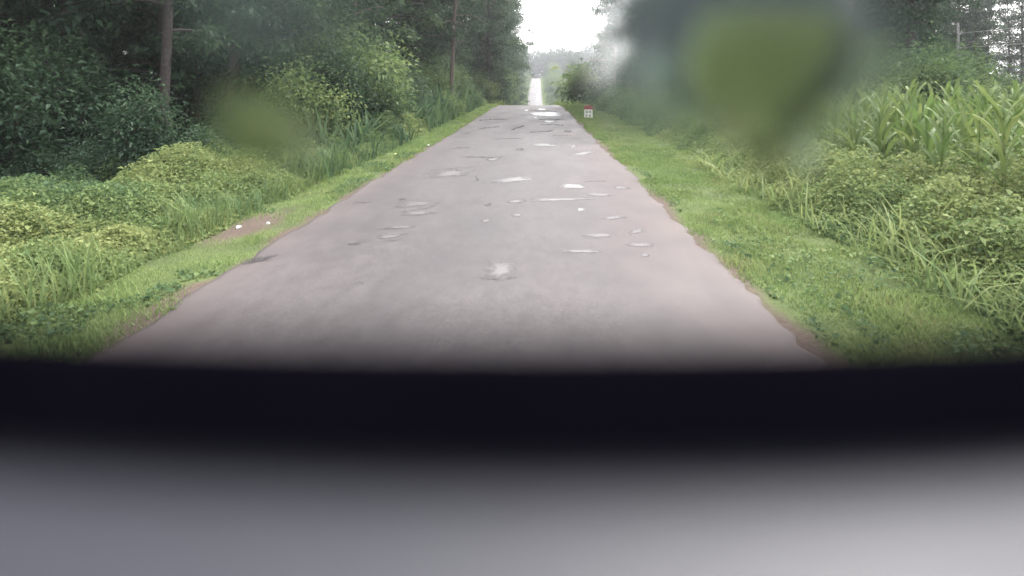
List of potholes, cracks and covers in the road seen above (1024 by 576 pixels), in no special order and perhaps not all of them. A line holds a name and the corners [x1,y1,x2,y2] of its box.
pothole [432,169,471,177]
pothole [489,263,514,278]
